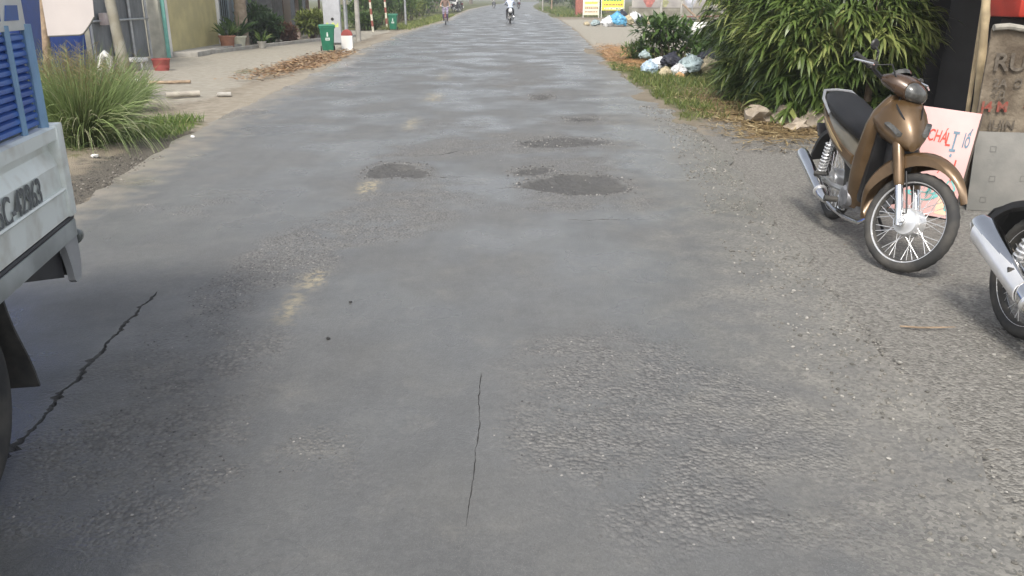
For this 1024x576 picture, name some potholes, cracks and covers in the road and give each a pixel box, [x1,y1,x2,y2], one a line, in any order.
pothole [359,161,435,180]
pothole [512,136,614,149]
pothole [514,171,638,197]
pothole [505,165,561,176]
crack [7,292,157,459]
crack [466,373,482,524]
